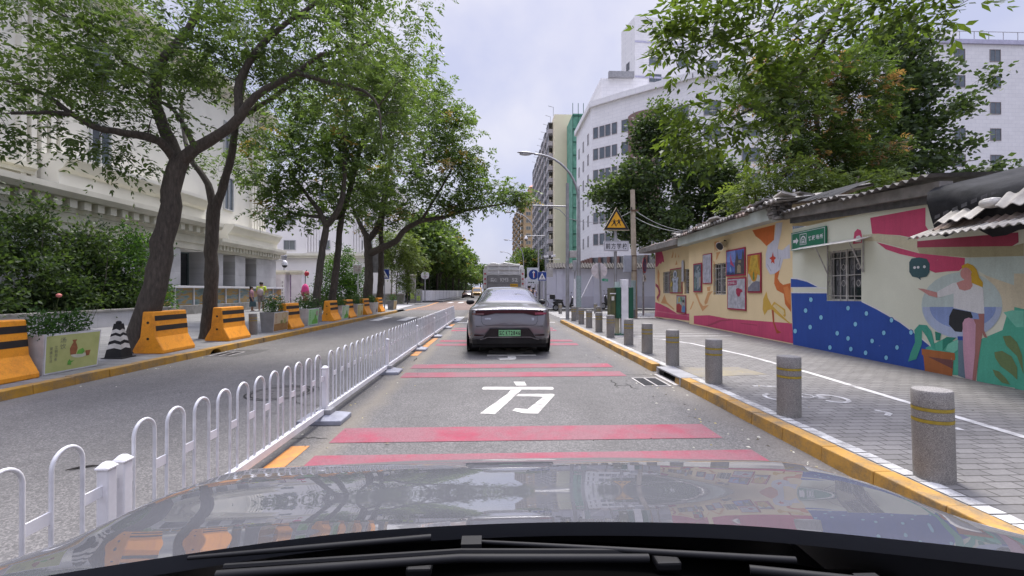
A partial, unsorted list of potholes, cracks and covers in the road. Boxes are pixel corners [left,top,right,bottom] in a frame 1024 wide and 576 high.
manhole cover [243,386,314,400]
